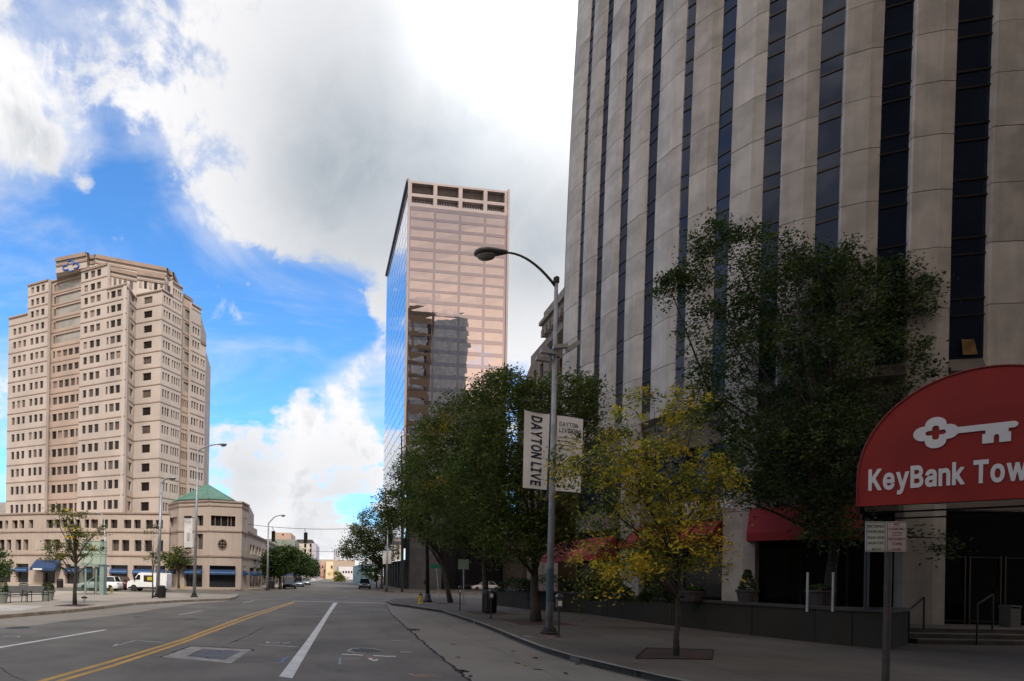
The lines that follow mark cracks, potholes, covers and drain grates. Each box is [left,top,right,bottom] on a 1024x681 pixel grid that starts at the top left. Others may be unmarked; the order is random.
utility cover [163,646,251,663]
